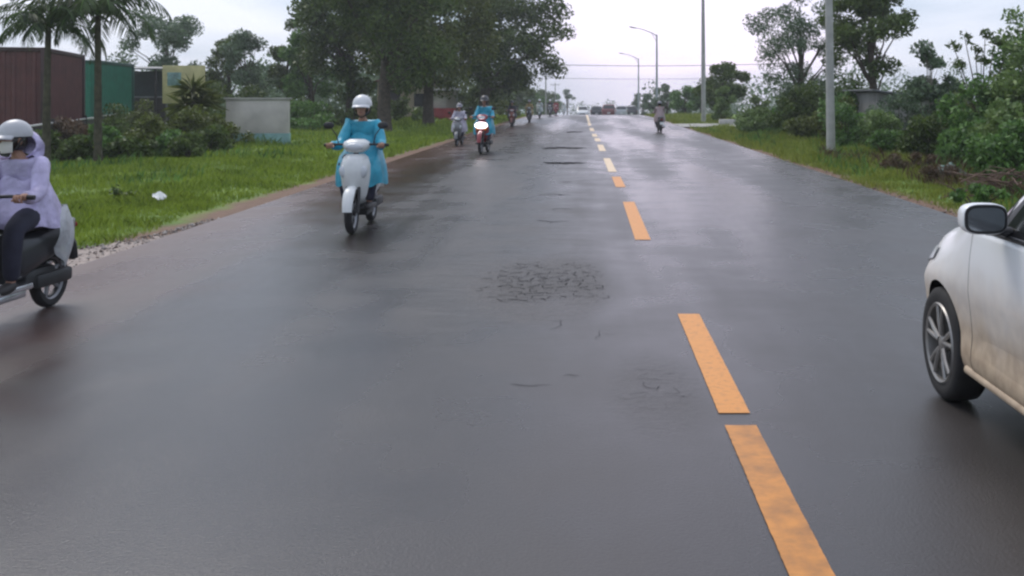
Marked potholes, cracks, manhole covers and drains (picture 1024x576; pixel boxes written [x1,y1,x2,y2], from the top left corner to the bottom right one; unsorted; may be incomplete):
crack [625,369,697,409]
crack [475,262,613,303]
